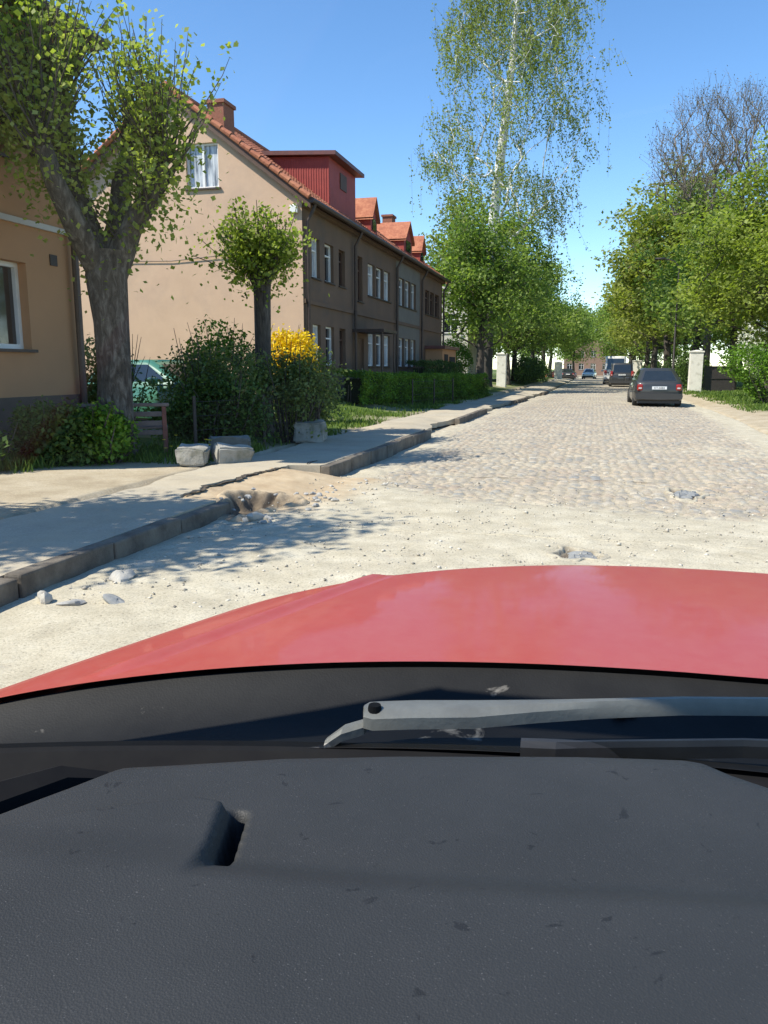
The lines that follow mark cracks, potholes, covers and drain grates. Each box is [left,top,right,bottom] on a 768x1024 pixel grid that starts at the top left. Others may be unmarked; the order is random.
pothole [216,490,310,522]
pothole [546,545,611,562]
pothole [665,487,710,504]
crack [184,467,285,496]
